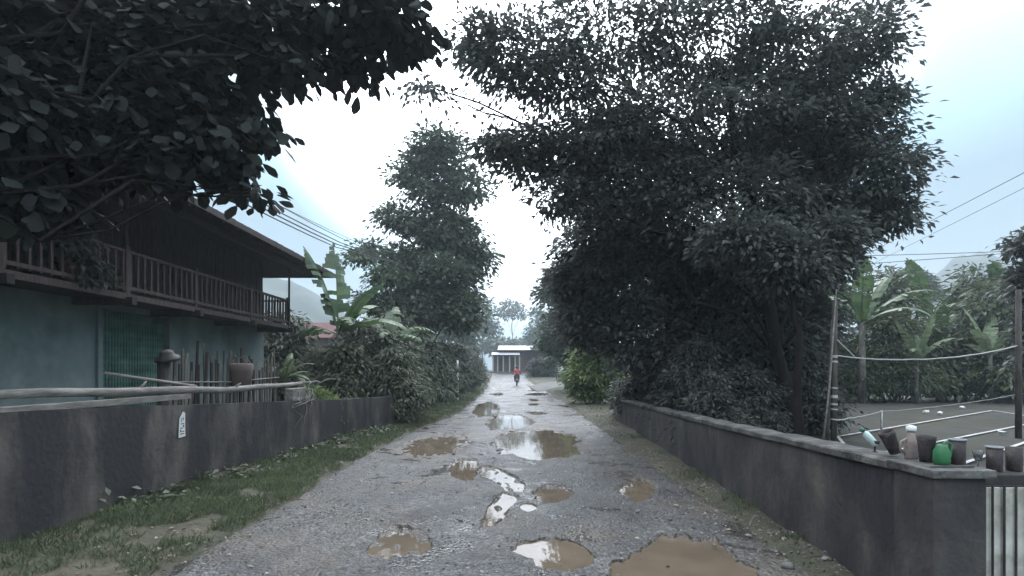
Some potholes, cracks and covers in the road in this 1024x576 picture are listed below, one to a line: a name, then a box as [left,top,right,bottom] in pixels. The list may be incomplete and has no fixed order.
pothole [531,483,574,504]
pothole [478,491,520,530]
pothole [510,536,596,572]
pothole [365,524,433,559]
pothole [489,429,583,460]
pothole [471,401,501,417]
pothole [476,465,526,492]
pothole [614,478,658,502]
pothole [397,433,473,458]
pothole [485,414,537,431]
pothole [448,458,479,482]
pothole [520,502,537,512]
